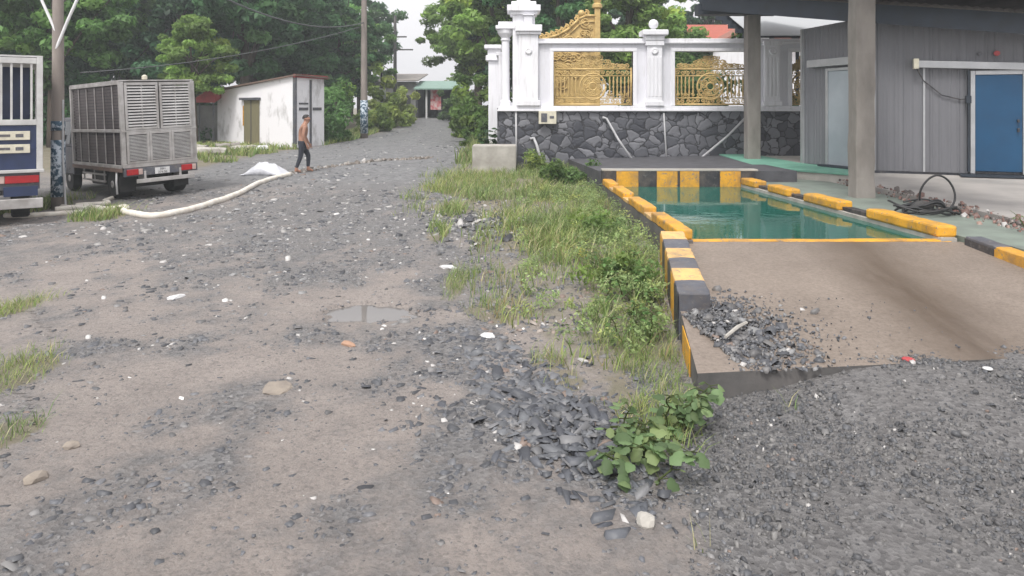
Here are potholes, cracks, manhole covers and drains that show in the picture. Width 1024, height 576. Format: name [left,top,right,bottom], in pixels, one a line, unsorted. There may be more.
pothole [314,300,432,324]
